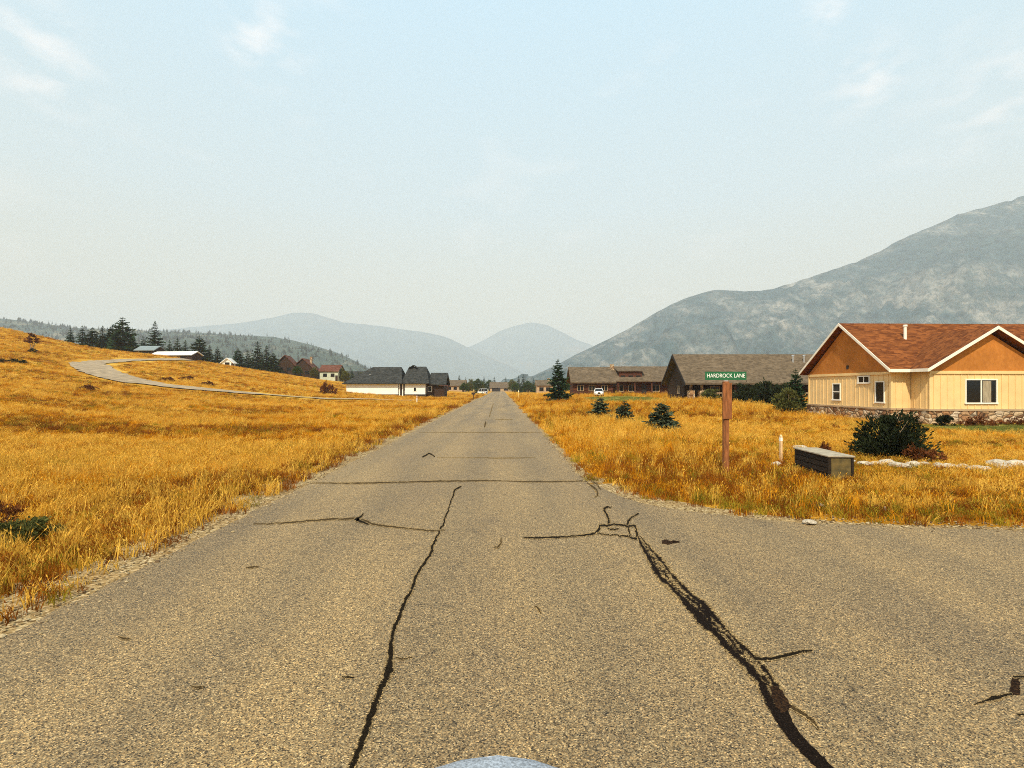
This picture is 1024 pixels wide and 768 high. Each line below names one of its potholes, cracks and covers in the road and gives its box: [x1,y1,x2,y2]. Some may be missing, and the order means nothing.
crack [974,674,1024,716]
crack [253,480,834,768]
crack [420,403,535,433]
